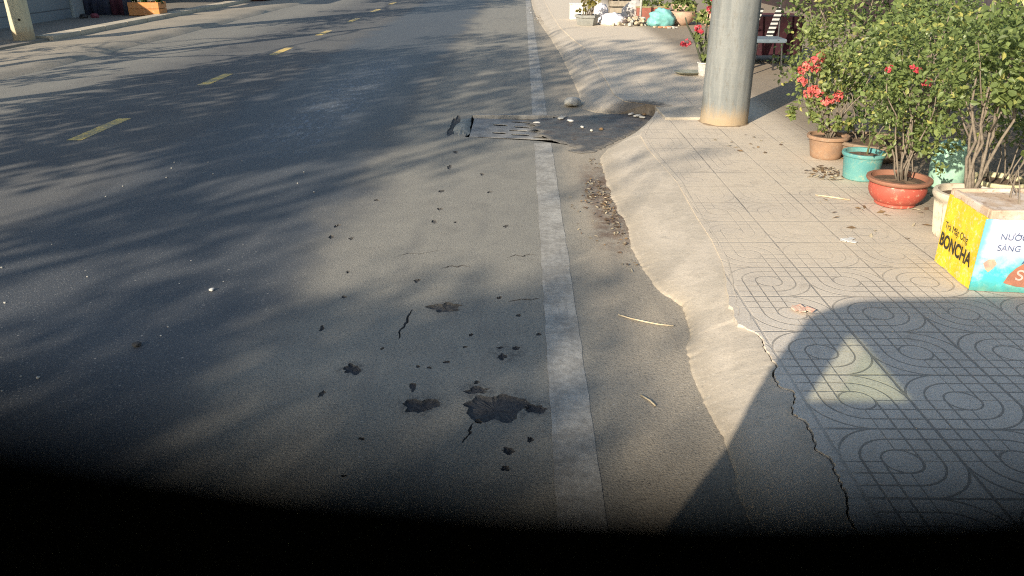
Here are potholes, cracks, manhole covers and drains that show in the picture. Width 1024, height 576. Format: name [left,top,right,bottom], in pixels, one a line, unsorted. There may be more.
pothole [343,363,361,375]
pothole [463,394,530,423]
pothole [425,302,462,312]
crack [398,310,412,338]
pothole [524,404,547,414]
pothole [402,399,440,413]
drain grate [465,114,567,145]
